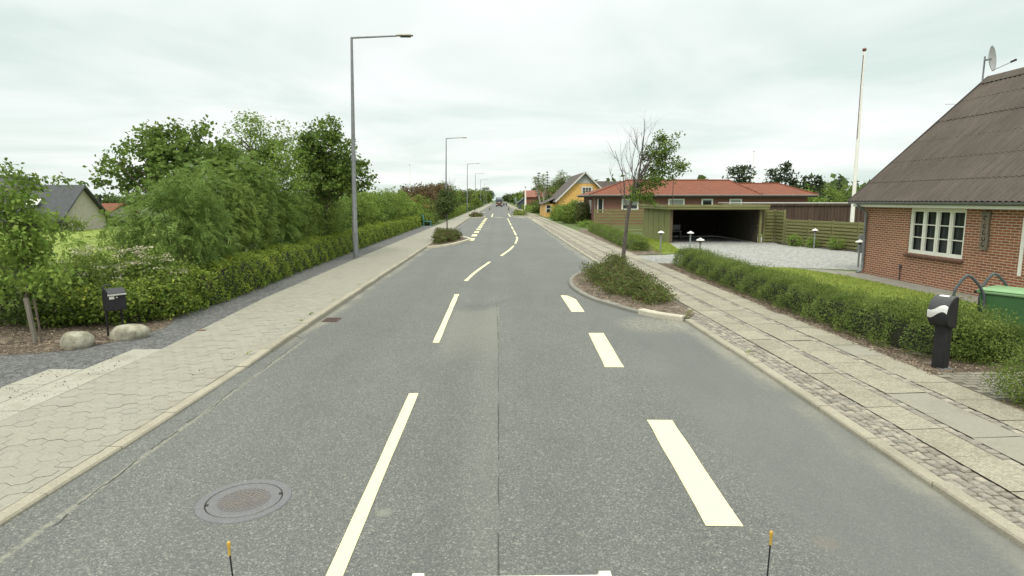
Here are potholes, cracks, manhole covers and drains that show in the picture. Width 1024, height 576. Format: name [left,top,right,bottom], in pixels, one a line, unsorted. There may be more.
manhole cover [194,479,292,524]
